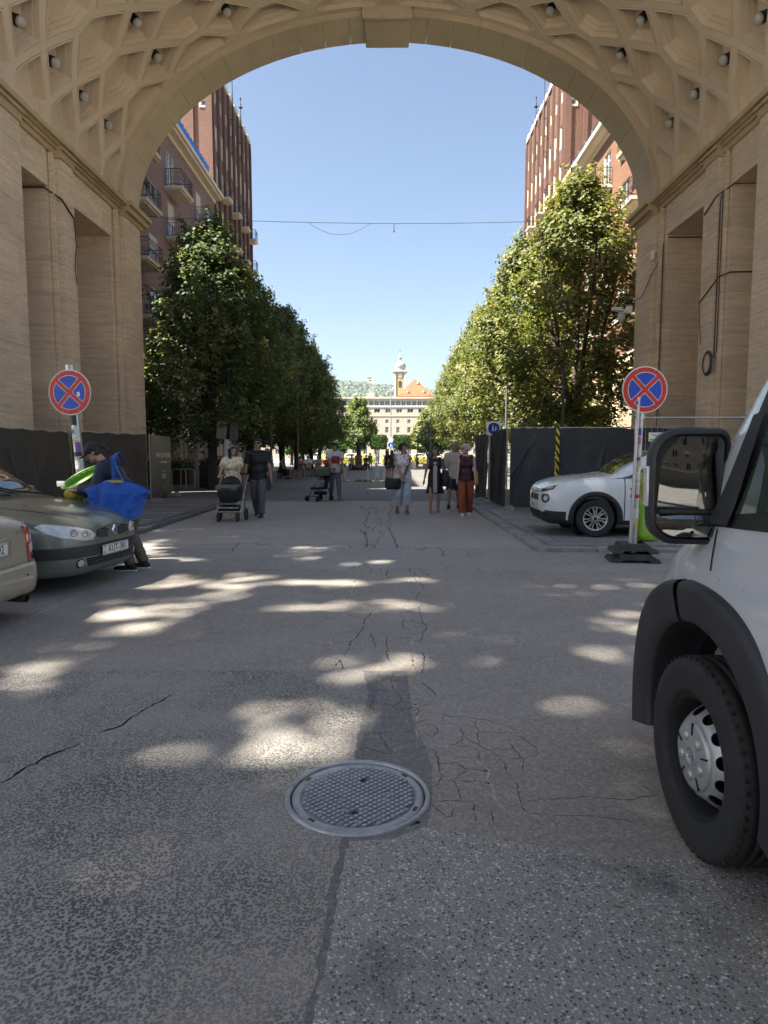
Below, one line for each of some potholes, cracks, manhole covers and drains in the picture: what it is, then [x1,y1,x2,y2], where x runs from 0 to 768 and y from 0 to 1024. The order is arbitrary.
manhole cover [284,760,431,837]
crack [403,714,654,833]
crack [326,573,435,754]
